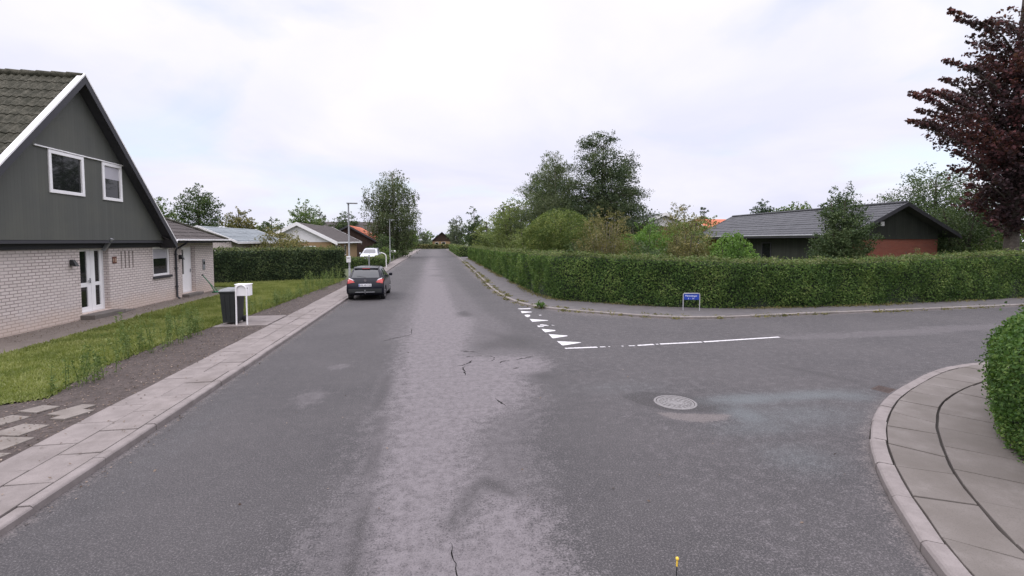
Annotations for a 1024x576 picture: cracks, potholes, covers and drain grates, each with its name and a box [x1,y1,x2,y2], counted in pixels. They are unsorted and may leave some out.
manhole cover [654,395,697,410]
